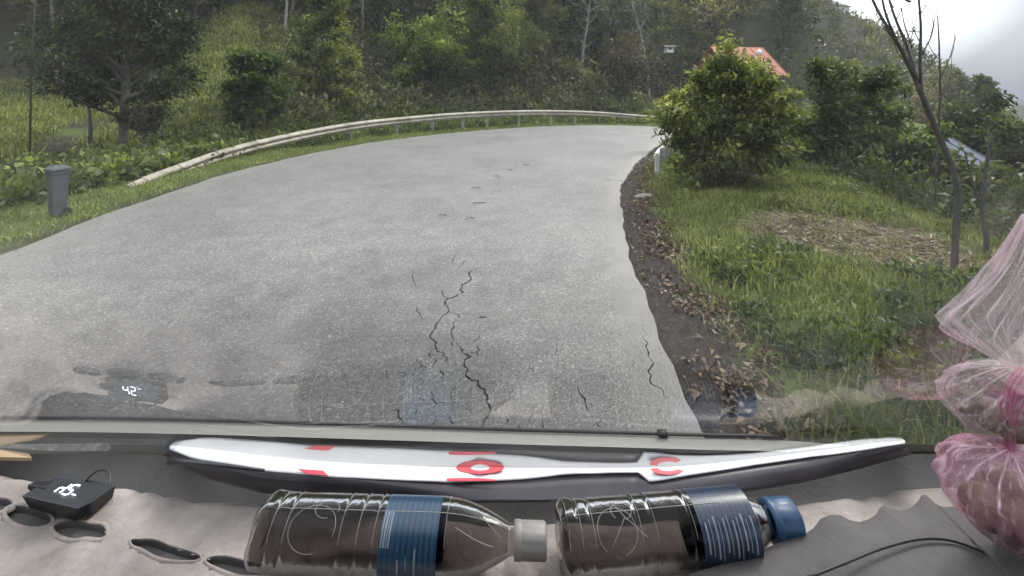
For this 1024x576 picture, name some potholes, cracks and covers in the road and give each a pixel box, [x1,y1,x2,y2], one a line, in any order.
crack [633,338,668,398]
crack [385,254,601,432]
